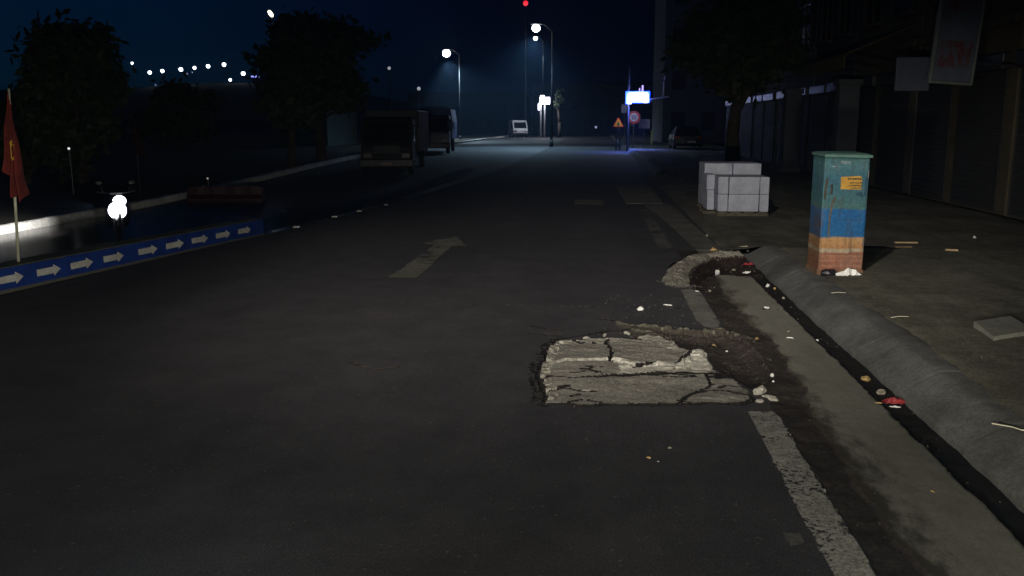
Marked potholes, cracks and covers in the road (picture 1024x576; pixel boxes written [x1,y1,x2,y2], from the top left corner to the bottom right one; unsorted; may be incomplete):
crack [348,361,401,370]
crack [527,318,755,407]
pothole [662,250,765,292]
